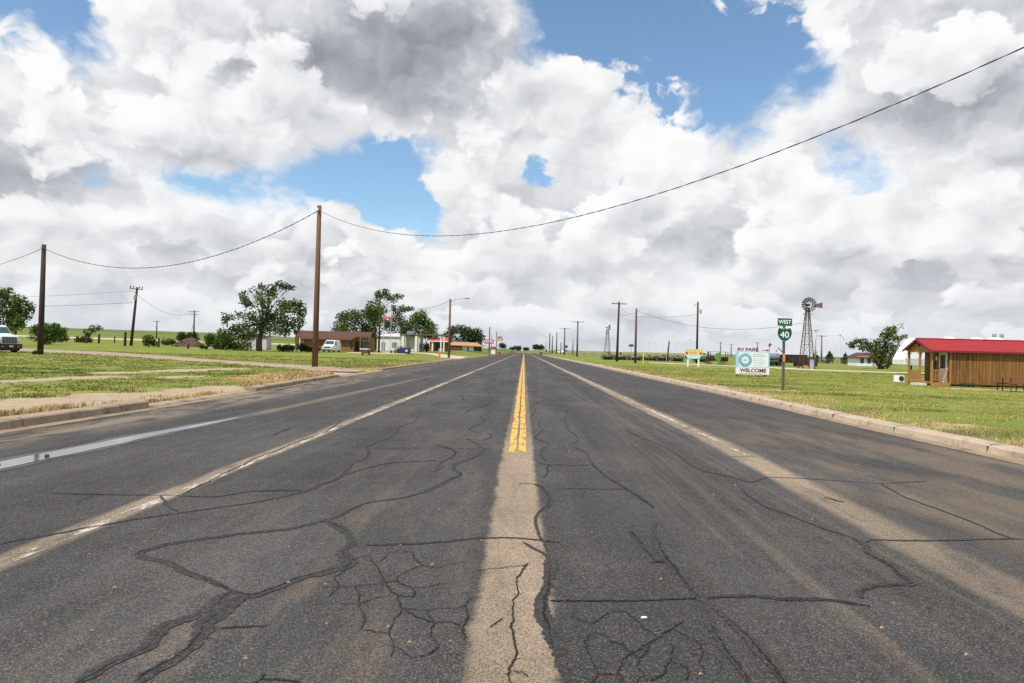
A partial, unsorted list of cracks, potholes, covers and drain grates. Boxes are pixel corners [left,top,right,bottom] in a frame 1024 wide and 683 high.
crack [1,396,1017,683]
